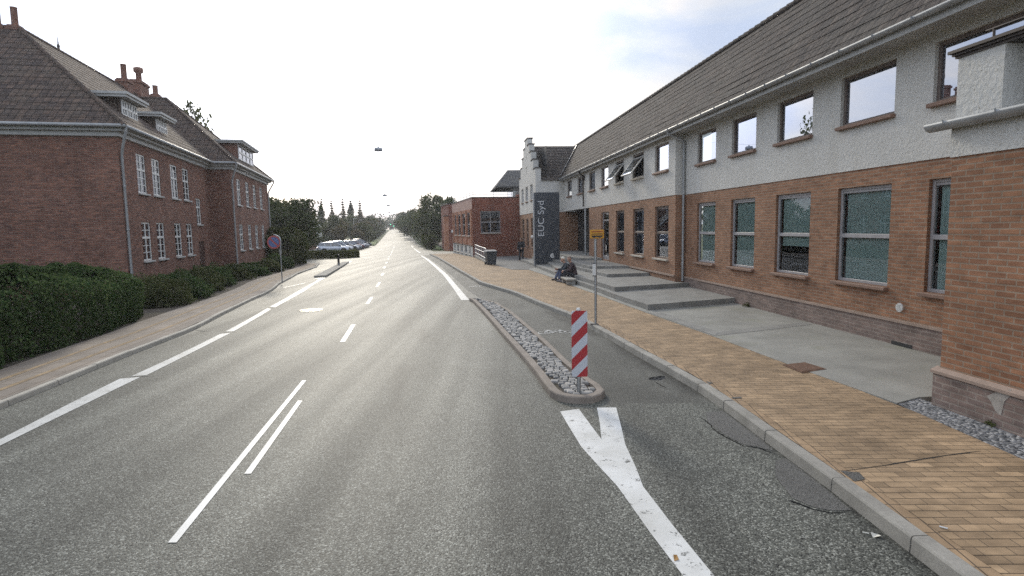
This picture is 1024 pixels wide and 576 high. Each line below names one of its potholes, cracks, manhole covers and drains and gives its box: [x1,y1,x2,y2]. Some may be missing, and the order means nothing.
manhole cover [783,362,825,373]
